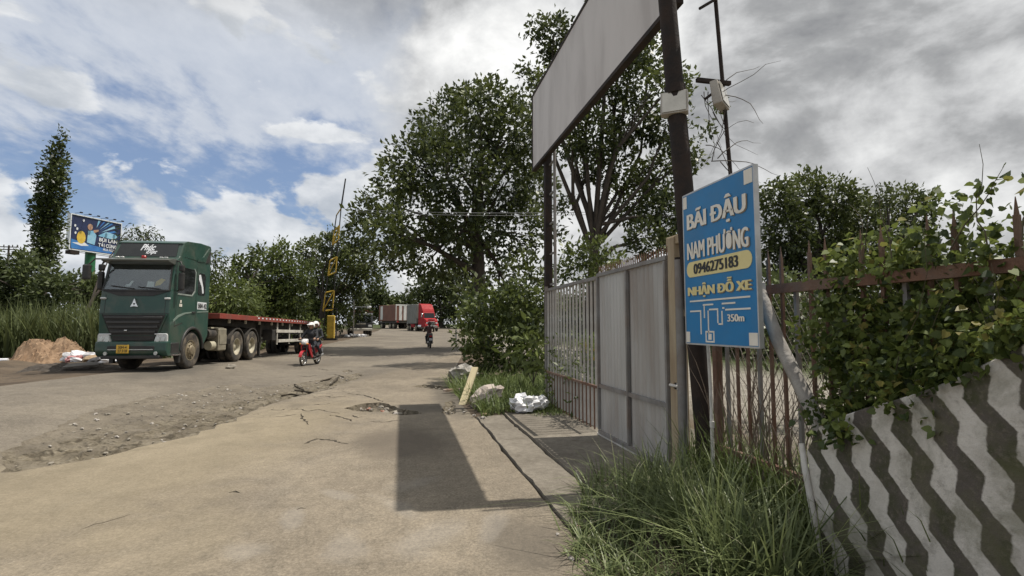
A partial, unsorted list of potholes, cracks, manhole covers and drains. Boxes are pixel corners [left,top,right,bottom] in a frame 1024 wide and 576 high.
crack [271,369,398,444]
pothole [344,402,422,415]
